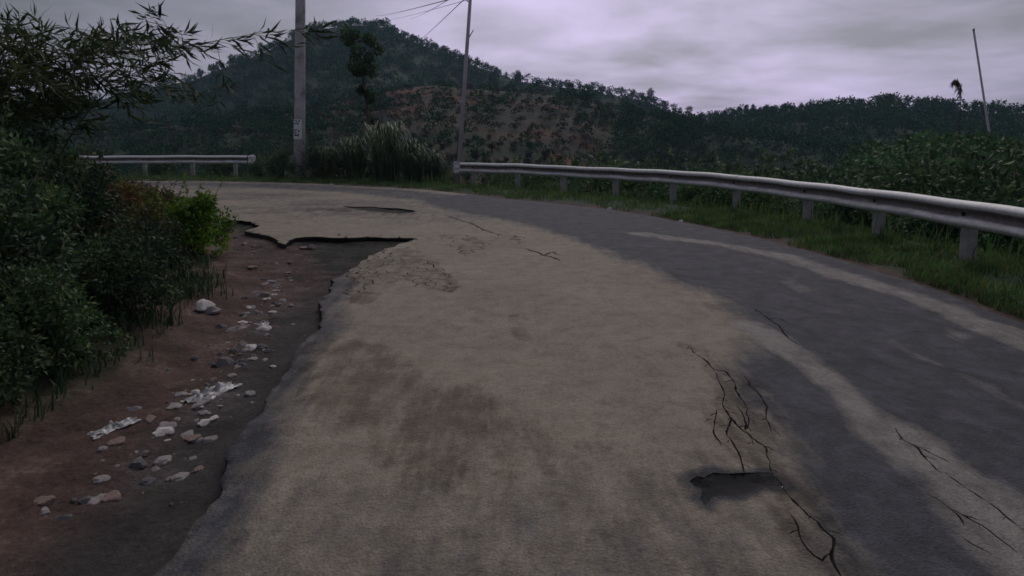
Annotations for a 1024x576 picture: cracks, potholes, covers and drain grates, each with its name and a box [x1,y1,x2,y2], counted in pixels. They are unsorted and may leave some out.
crack [343,254,460,295]
crack [754,308,797,344]
pothole [344,206,414,214]
pothole [690,472,783,505]
crack [895,428,1024,555]
pothole [283,237,416,288]
crack [440,216,561,261]
crack [687,346,844,576]
